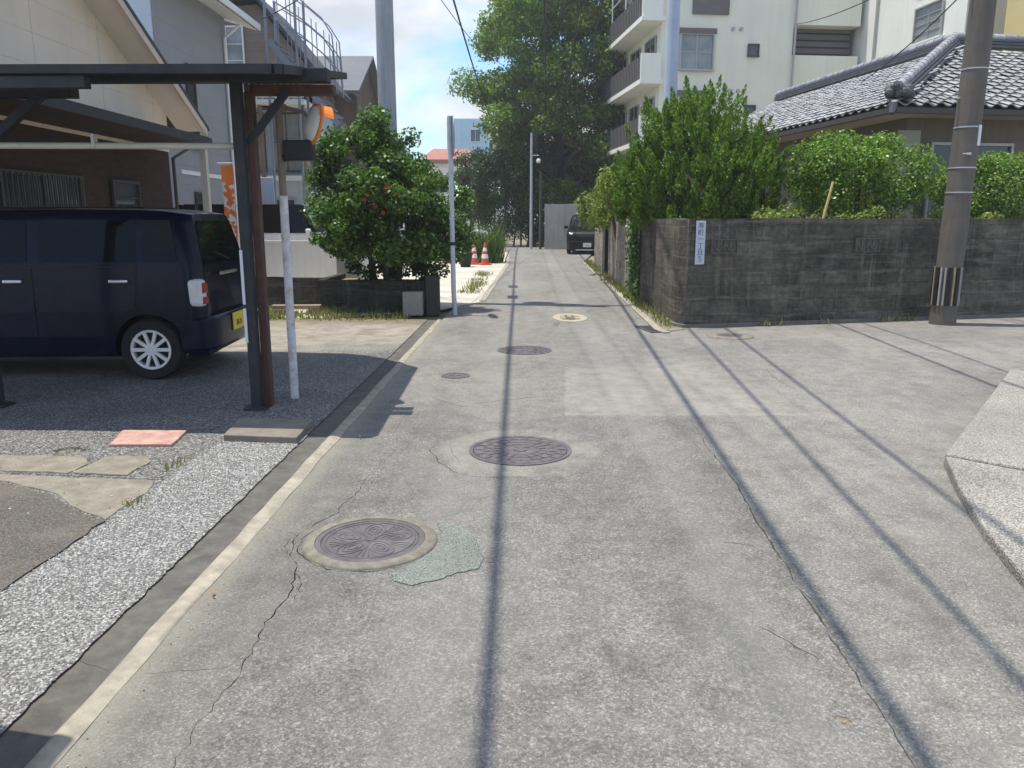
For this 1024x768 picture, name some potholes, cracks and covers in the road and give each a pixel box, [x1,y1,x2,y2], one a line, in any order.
crack [149,451,511,768]
manhole cover [302,515,437,572]
manhole cover [469,435,571,466]
crack [761,627,819,660]
manhole cover [497,345,552,355]
manhole cover [706,332,754,340]
